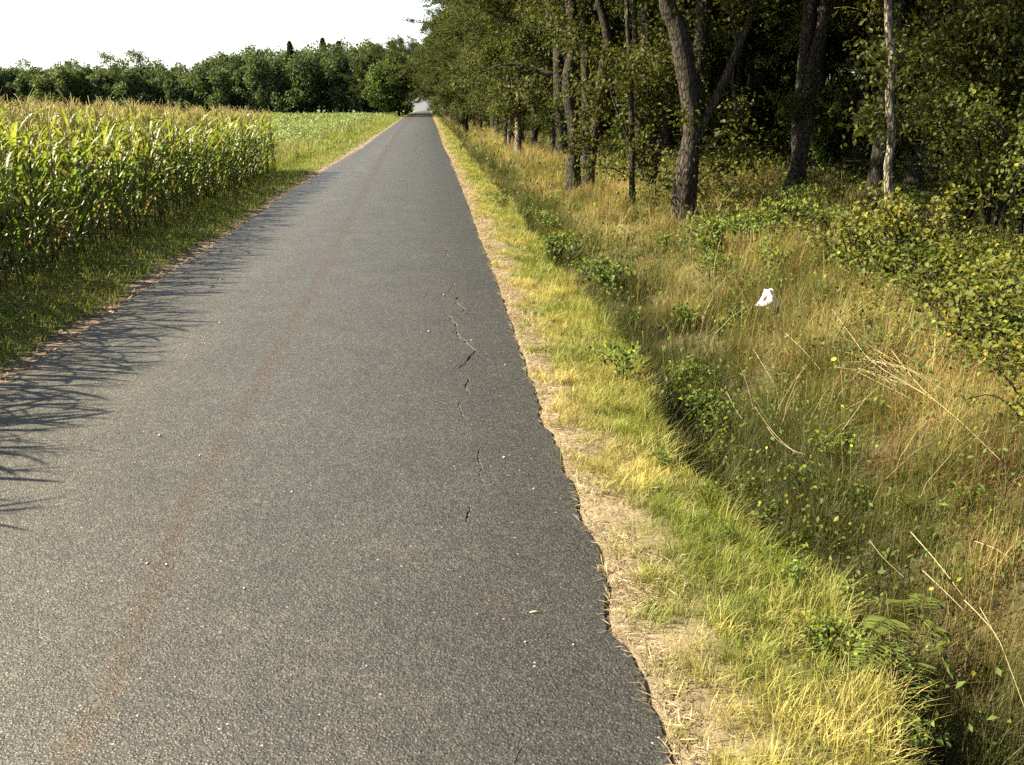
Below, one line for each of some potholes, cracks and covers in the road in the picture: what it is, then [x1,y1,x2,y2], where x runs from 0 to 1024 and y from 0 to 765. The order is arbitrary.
crack [446,279,476,417]
